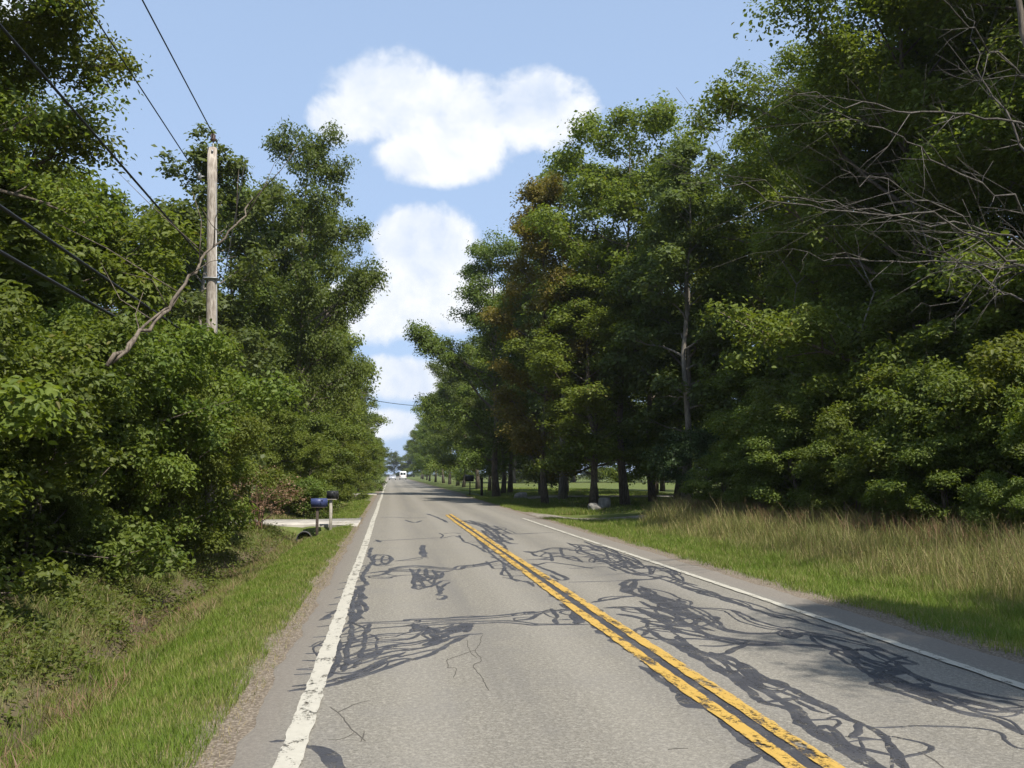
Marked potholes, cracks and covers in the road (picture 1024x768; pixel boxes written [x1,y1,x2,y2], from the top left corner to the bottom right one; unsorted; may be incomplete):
crack [330,700,371,741]
